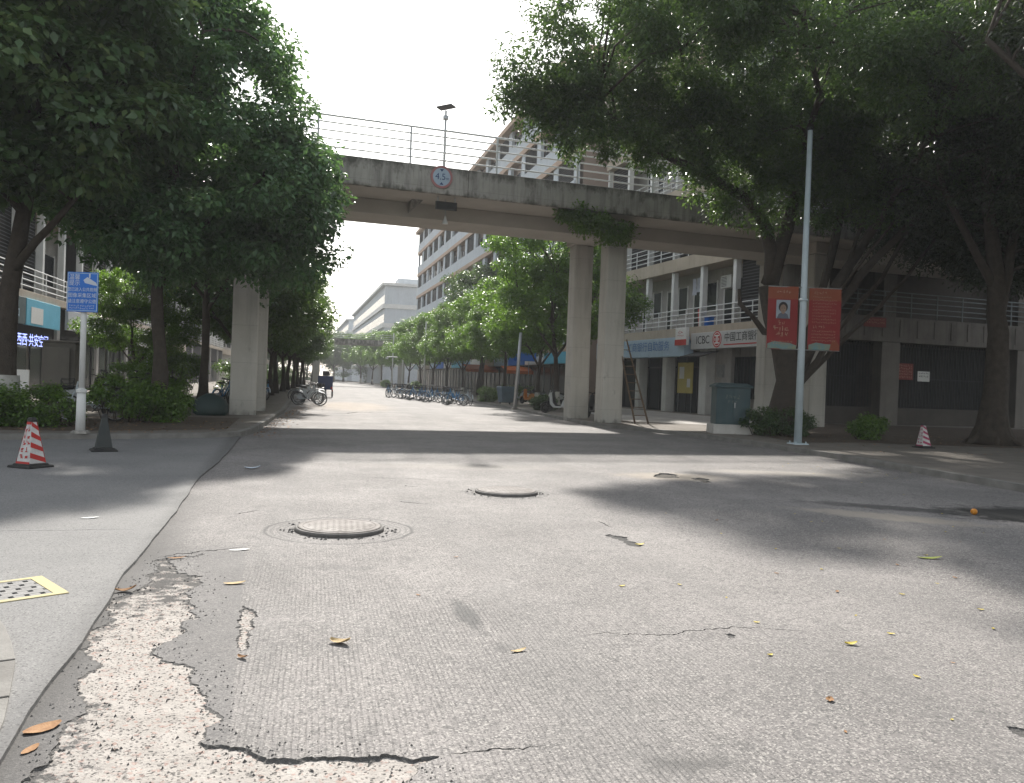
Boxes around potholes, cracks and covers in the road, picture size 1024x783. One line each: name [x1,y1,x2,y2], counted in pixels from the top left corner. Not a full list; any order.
drain grate [0,576,69,603]
pothole [18,552,467,783]
manhole cover [279,518,397,540]
crack [453,745,546,754]
pothole [605,534,641,547]
manhole cover [466,486,549,499]
crack [590,626,802,636]
